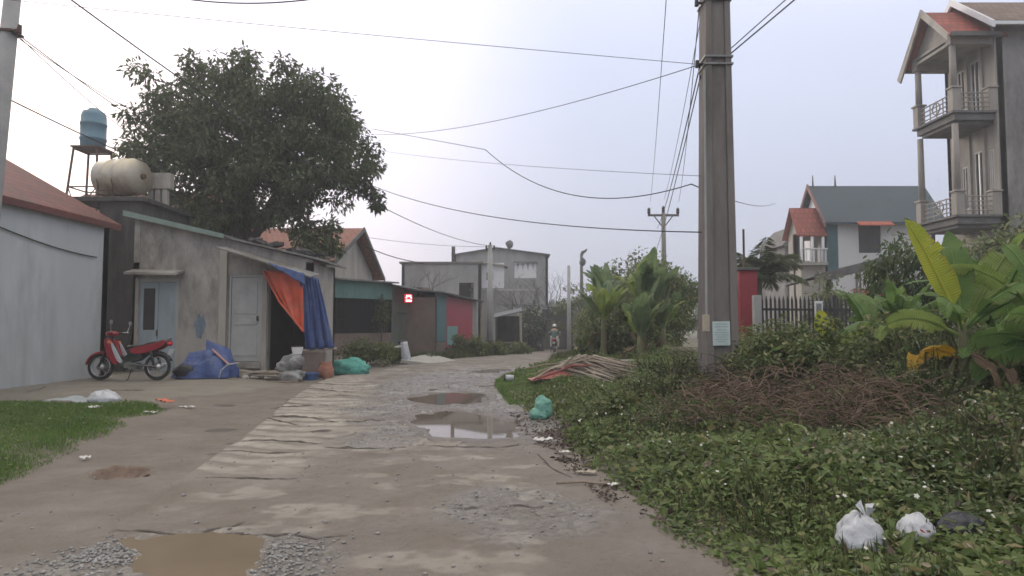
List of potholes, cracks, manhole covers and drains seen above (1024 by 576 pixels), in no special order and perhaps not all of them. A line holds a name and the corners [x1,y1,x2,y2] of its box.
pothole [90,465,150,480]
pothole [119,532,265,576]
pothole [393,390,499,407]
crack [216,383,404,454]
pothole [398,407,541,444]
